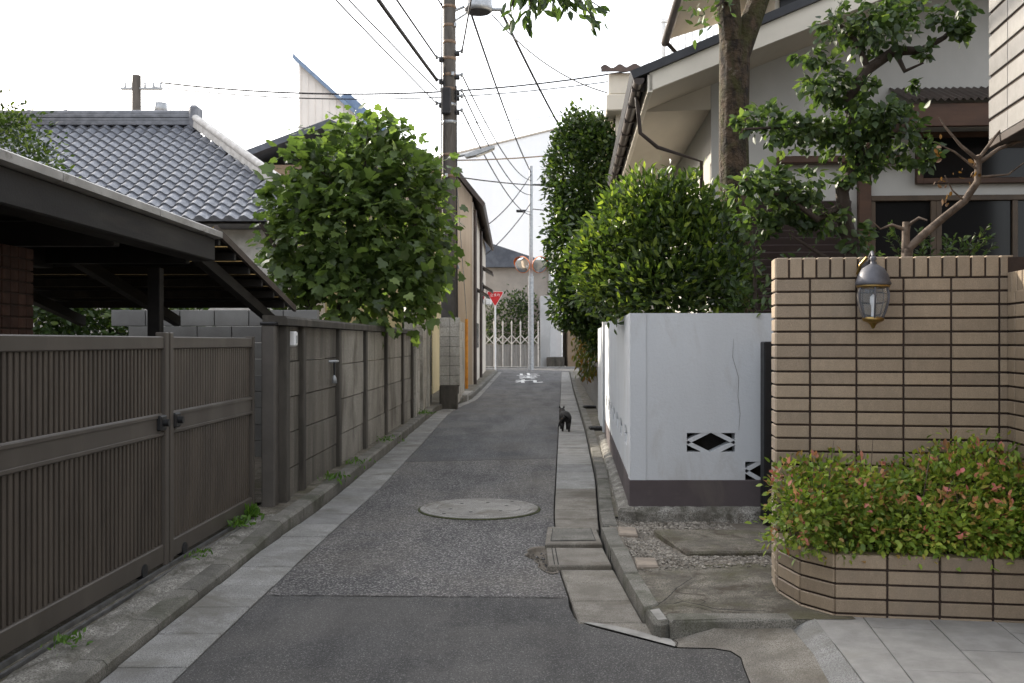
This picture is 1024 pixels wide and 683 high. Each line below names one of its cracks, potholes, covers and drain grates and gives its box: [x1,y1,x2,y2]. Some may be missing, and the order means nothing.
pothole [524,546,559,574]
manhole cover [418,498,541,520]
crack [658,578,745,611]
